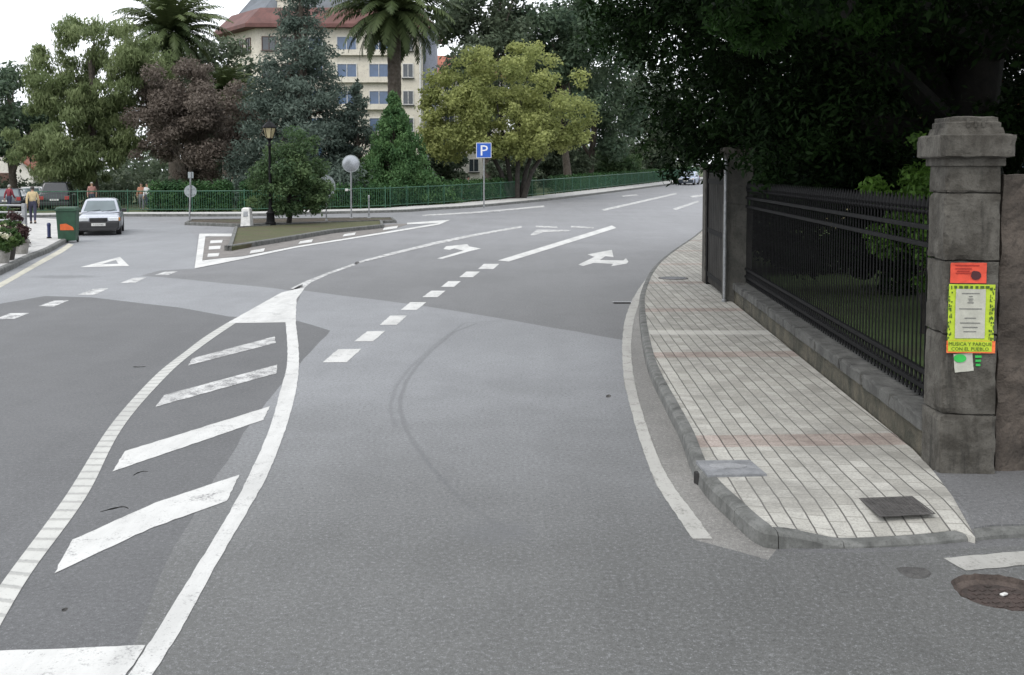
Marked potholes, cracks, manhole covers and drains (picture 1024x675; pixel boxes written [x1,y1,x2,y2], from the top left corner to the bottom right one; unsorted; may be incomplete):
manhole cover [951,573,1024,611]
